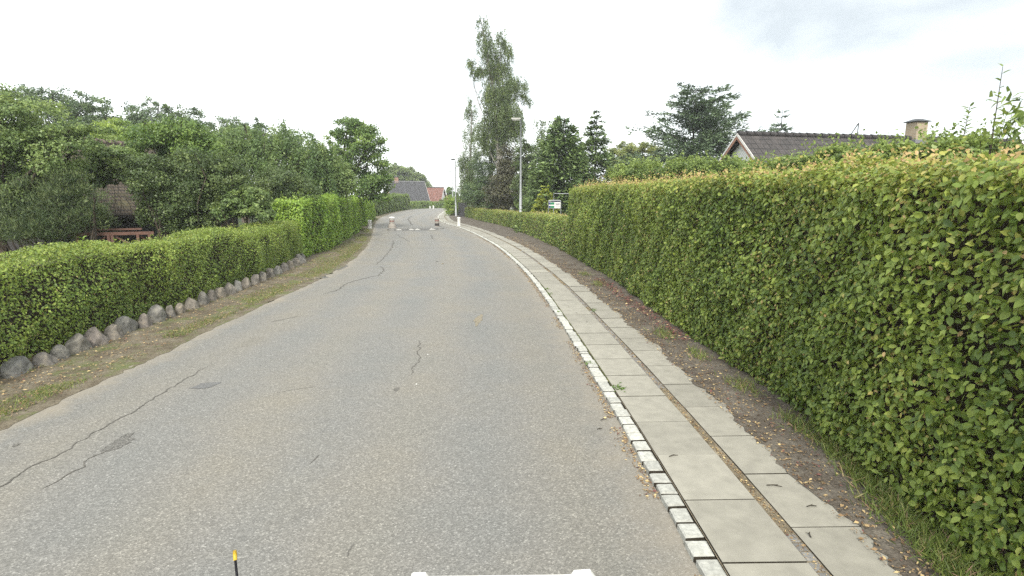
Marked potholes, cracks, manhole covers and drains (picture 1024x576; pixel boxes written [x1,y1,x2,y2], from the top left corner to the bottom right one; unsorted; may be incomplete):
crack [0,369,201,489]
crack [328,215,412,293]
